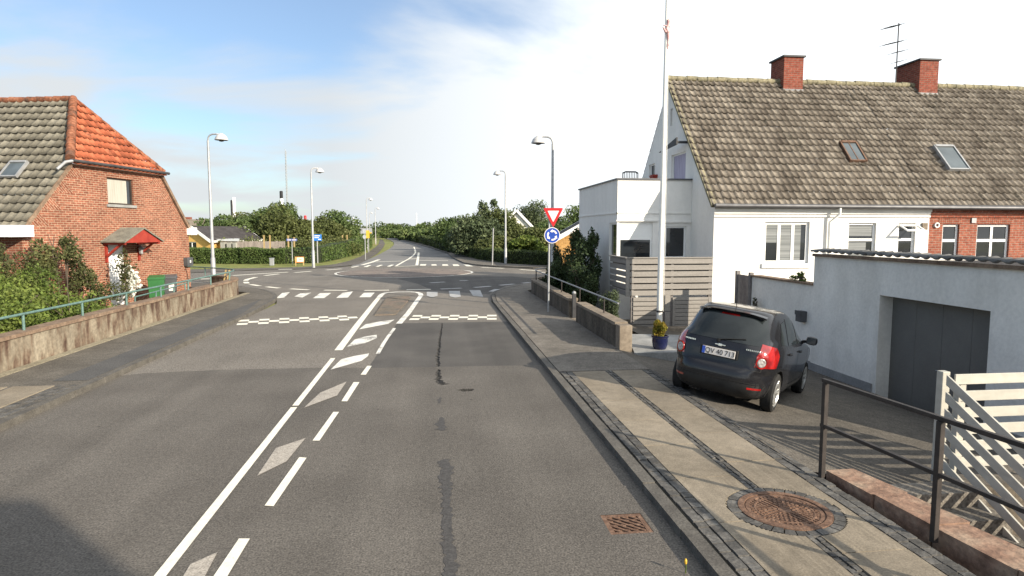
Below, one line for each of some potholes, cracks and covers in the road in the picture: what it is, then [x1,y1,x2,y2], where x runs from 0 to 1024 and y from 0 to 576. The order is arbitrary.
manhole cover [738,491,834,532]
drain grate [600,513,653,535]
